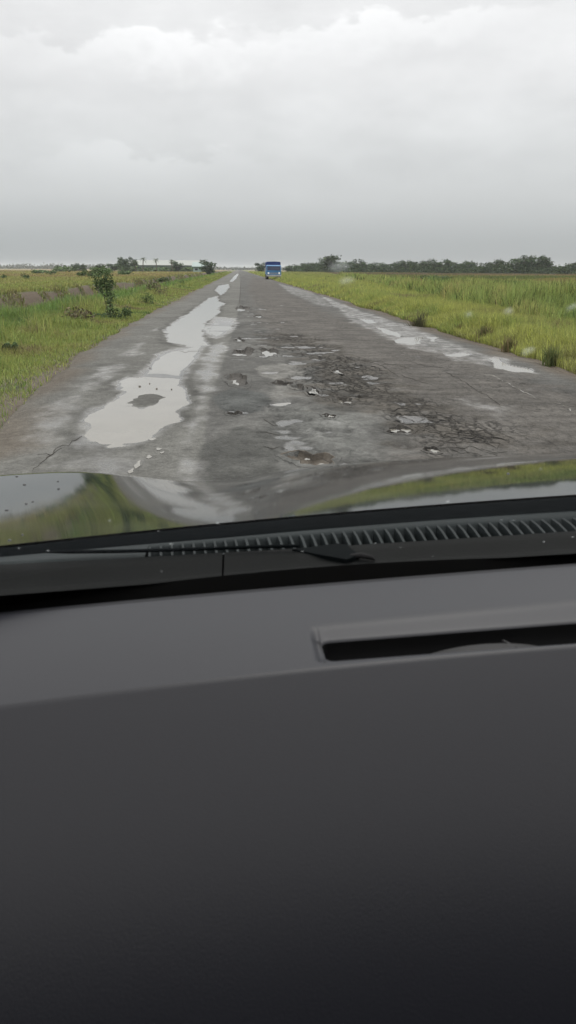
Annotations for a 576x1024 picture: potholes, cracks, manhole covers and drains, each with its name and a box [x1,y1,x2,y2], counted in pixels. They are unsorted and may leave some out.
pothole [224,409,245,417]
pothole [420,445,444,455]
pothole [274,448,342,468]
pothole [84,370,189,448]
pothole [221,371,252,389]
pothole [303,384,322,397]
pothole [228,345,262,360]
crack [392,401,509,455]
crack [269,334,576,415]
